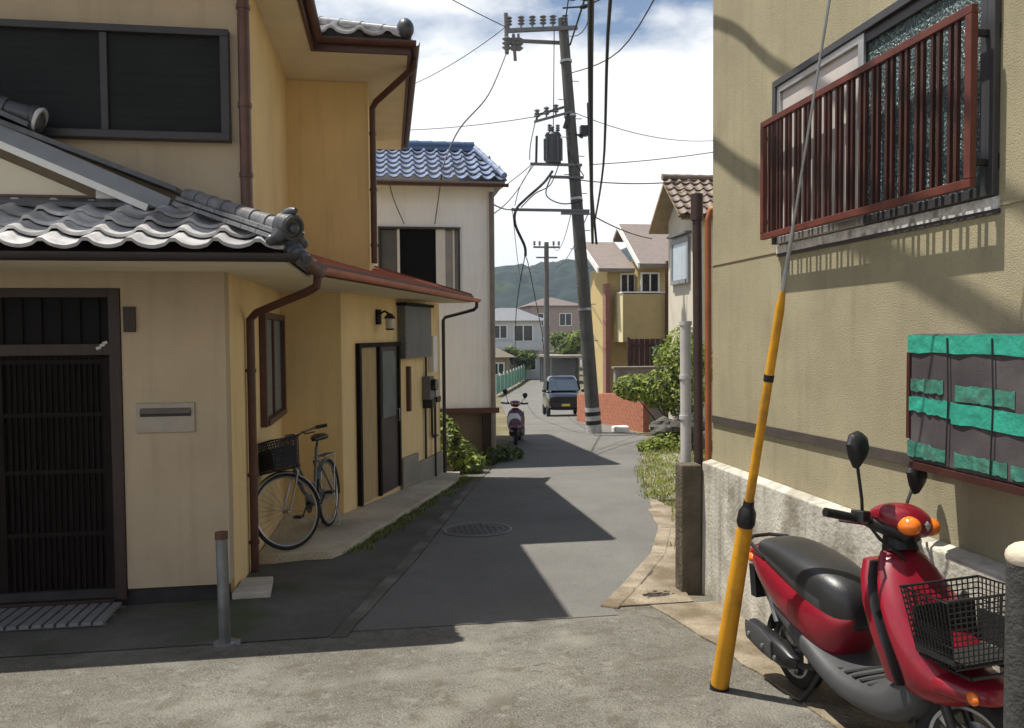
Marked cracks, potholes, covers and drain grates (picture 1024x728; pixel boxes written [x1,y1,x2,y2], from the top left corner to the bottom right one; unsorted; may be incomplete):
manhole cover [442,522,512,537]
